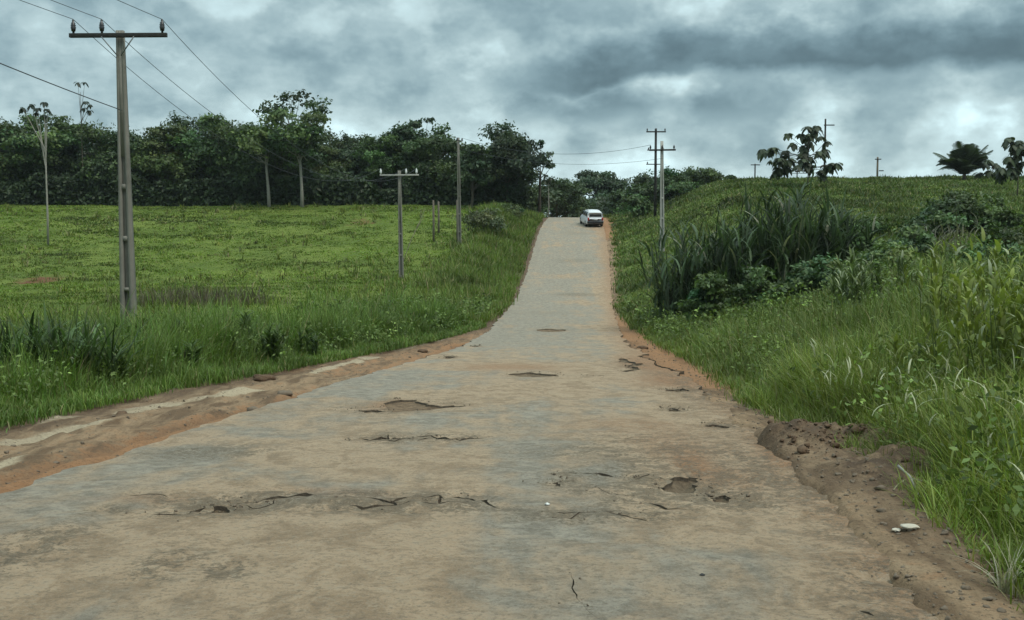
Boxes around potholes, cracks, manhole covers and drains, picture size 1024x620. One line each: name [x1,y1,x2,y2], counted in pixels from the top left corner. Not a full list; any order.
crack [342,495,497,510]
pothole [383,400,465,412]
crack [554,472,691,521]
pothole [661,476,698,493]
